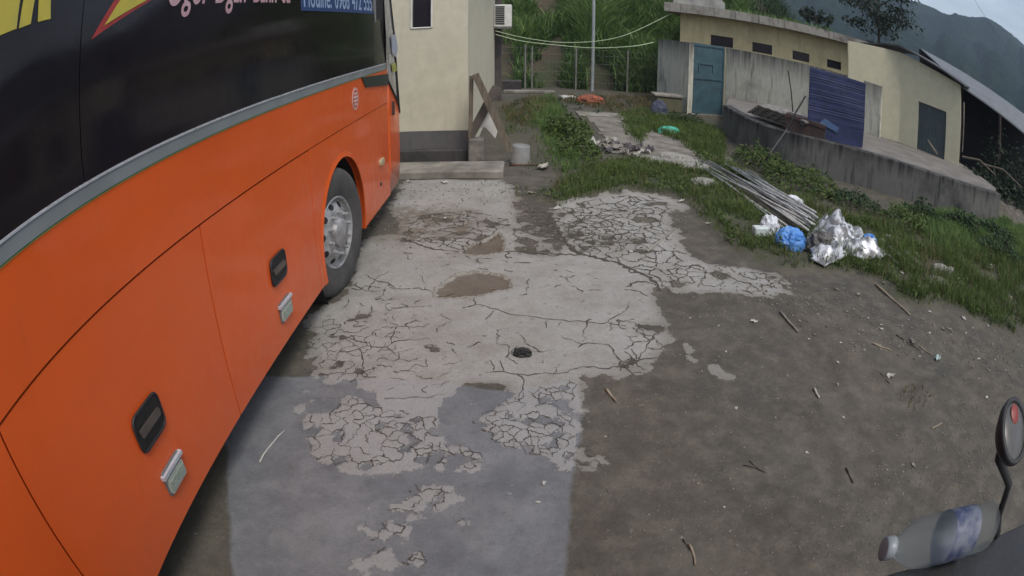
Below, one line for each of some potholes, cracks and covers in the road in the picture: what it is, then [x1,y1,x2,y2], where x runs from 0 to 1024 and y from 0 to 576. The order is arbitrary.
crack [296,274,663,469]
pothole [457,231,508,256]
crack [401,194,792,295]
pothole [432,270,516,299]
